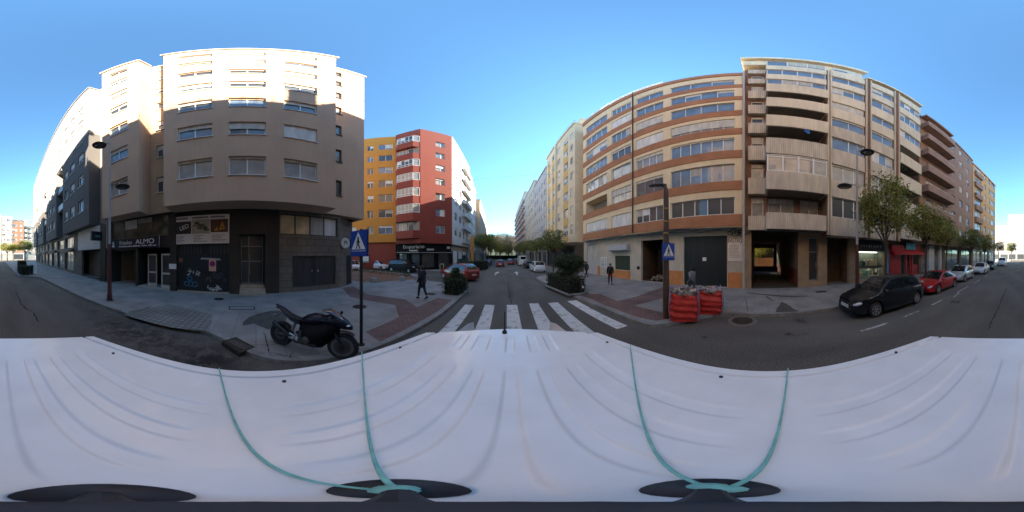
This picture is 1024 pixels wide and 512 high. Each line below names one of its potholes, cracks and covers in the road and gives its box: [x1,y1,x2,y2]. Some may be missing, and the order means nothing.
manhole cover [727,316,757,326]
drain grate [222,337,255,357]
